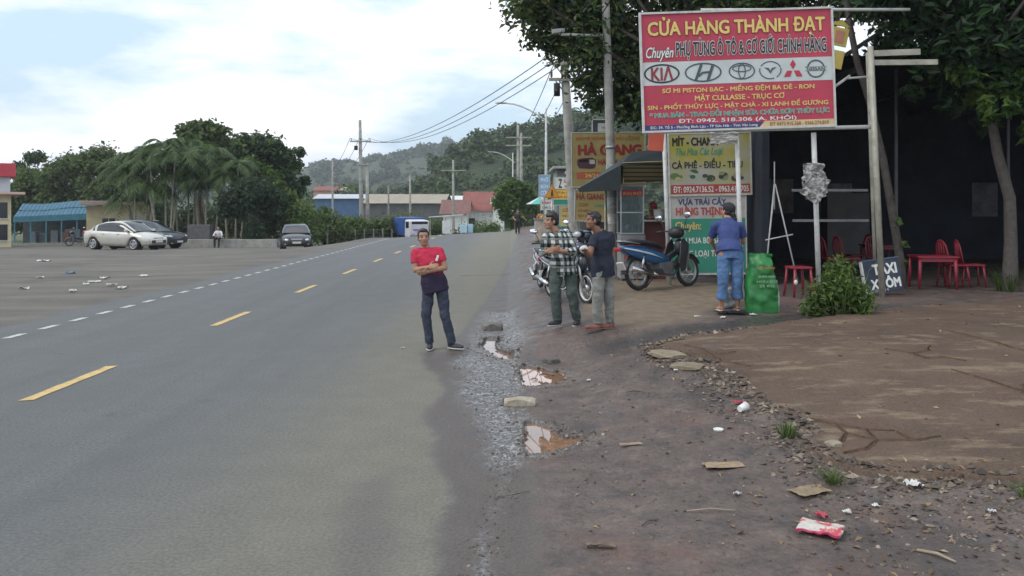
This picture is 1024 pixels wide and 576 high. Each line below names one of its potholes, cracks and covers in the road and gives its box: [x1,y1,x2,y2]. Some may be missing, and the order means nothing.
pothole [470,335,521,362]
pothole [502,416,609,460]
pothole [504,362,582,390]
crack [811,418,941,453]
crack [885,330,1024,394]
